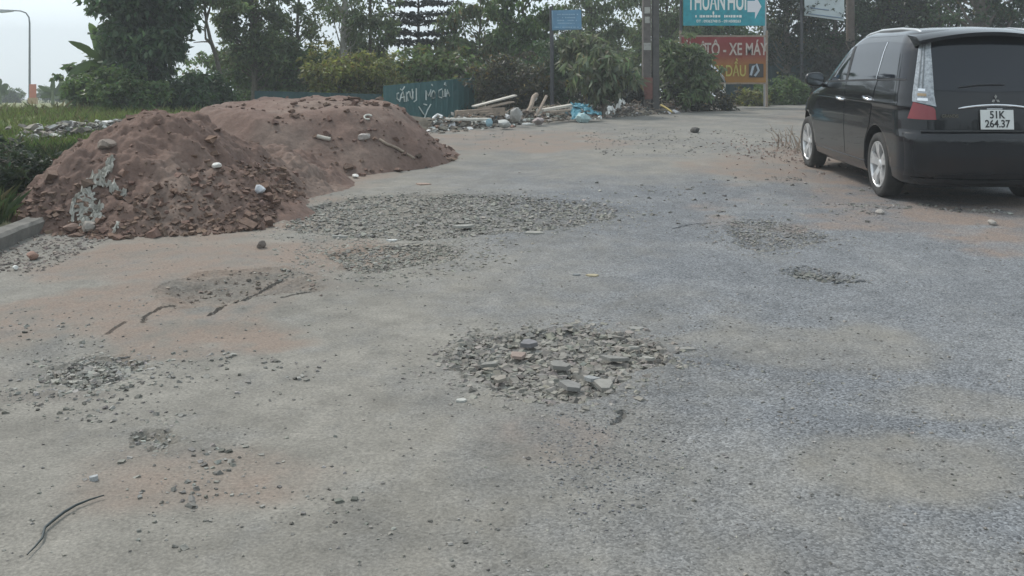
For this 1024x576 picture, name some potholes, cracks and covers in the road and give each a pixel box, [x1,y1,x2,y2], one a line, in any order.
pothole [248,189,665,249]
pothole [775,265,873,287]
pothole [19,350,176,398]
pothole [695,215,872,258]
pothole [392,314,730,421]
crack [104,305,176,335]
crack [207,279,321,316]
pothole [127,264,328,312]
